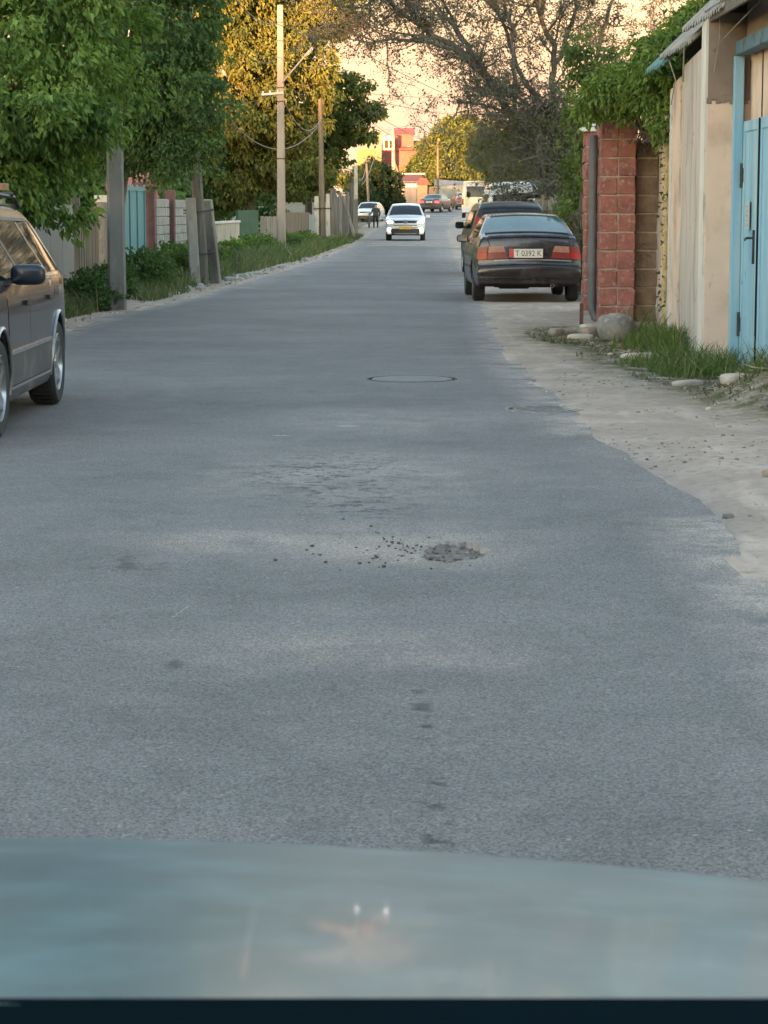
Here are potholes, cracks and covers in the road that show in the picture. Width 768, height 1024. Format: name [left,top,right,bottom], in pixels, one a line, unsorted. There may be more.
pothole [420,541,492,563]
manhole cover [505,405,584,413]
